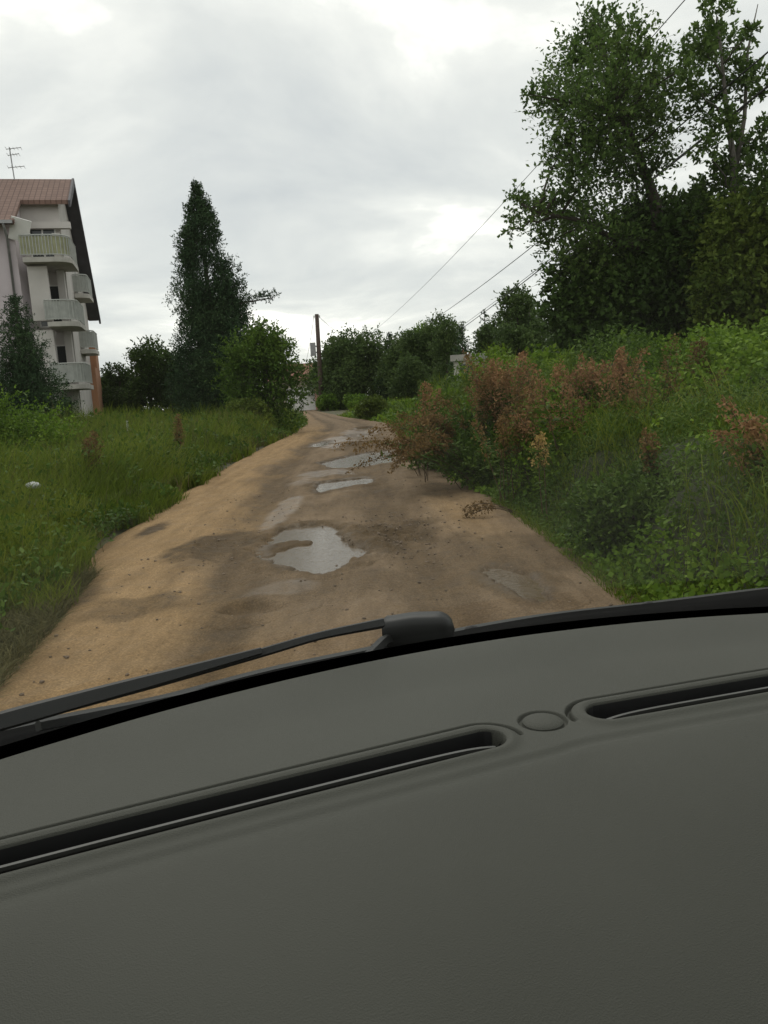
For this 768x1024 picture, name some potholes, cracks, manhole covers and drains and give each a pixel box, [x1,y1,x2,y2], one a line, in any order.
pothole [307,449,406,470]
pothole [298,476,389,495]
pothole [232,519,399,580]
pothole [301,440,338,449]
